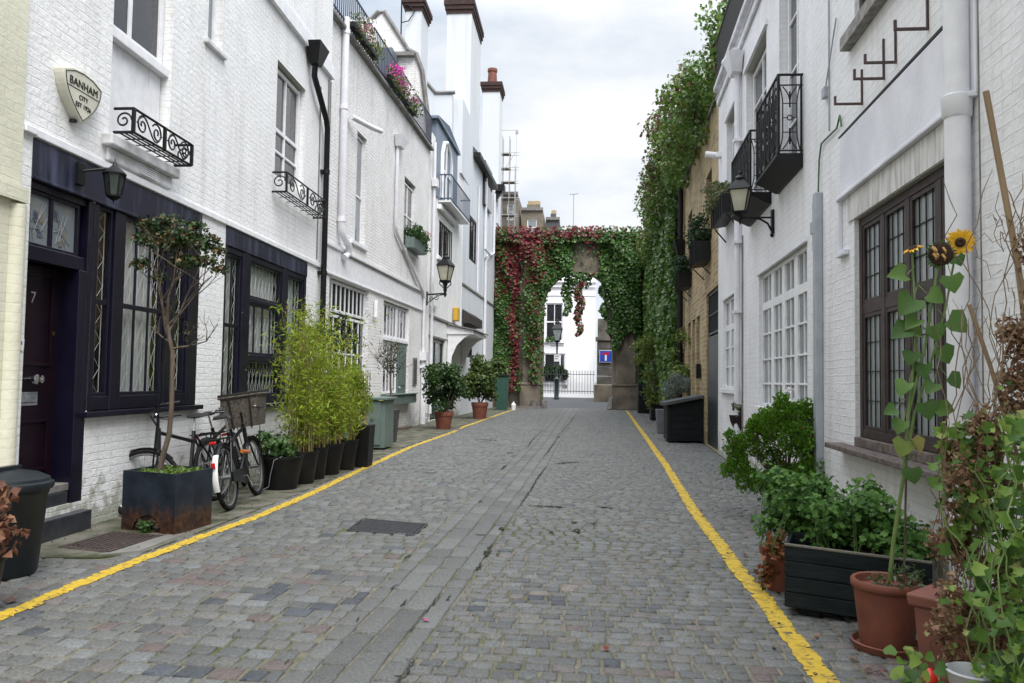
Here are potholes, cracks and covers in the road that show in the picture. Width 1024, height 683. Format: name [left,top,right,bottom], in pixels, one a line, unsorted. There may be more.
crack [502,452,578,508]
manhole cover [347,518,428,536]
